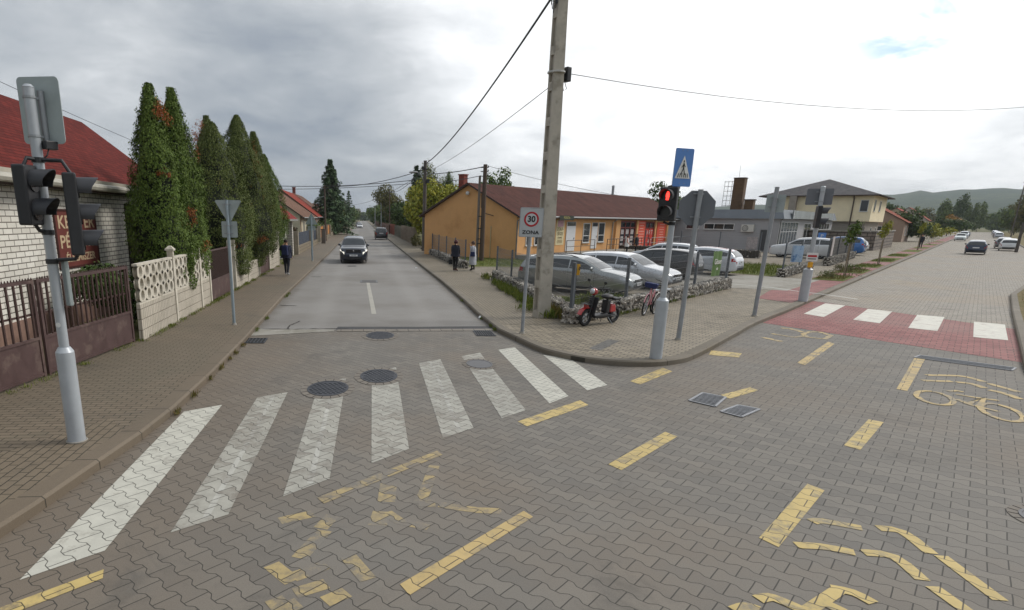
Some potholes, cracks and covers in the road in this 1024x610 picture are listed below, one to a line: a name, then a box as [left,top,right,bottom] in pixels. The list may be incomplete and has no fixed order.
crack [283,305,348,329]
manhole cover [462,359,497,370]
manhole cover [300,379,355,399]
manhole cover [1006,505,1024,522]
drain grate [914,355,1016,371]
drain grate [688,392,727,407]
manhole cover [354,367,403,385]
manhole cover [362,331,399,340]
drain grate [720,404,761,417]
